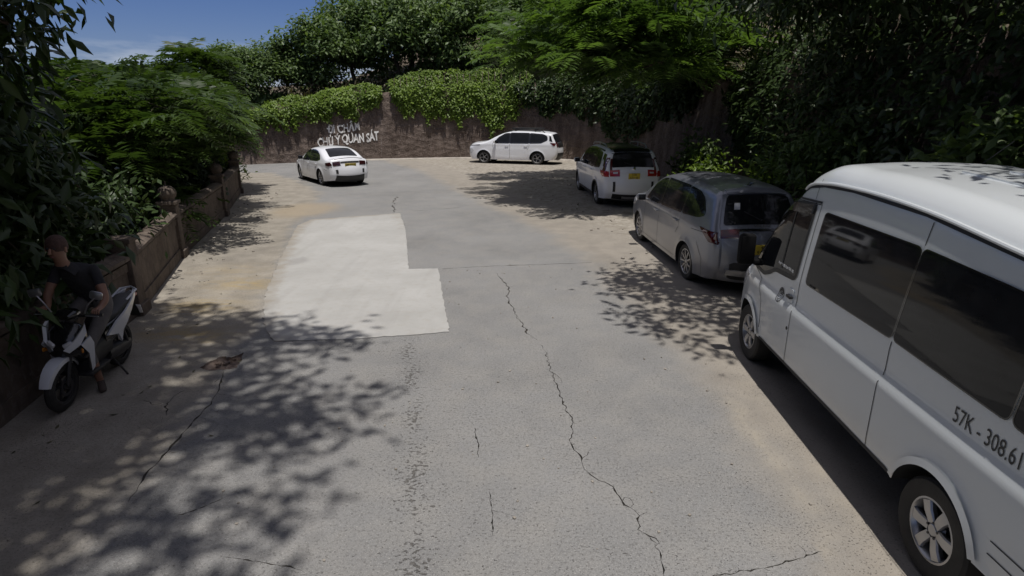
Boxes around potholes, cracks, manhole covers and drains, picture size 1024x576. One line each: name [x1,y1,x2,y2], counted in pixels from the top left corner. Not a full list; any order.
crack [228,557,305,573]
crack [713,547,821,576]
crack [498,276,665,576]
pothole [200,353,243,370]
crack [475,429,501,535]
